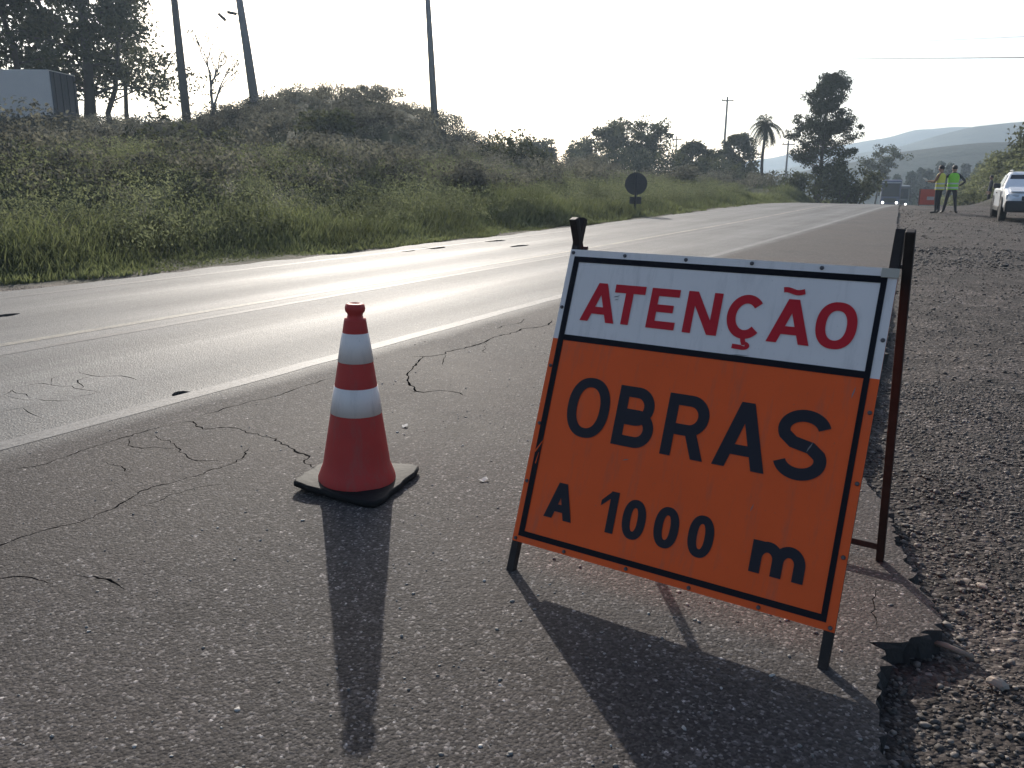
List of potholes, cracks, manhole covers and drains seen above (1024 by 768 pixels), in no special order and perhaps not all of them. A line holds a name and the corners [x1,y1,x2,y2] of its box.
crack [406,319,552,396]
crack [0,379,326,546]
crack [0,574,124,589]
